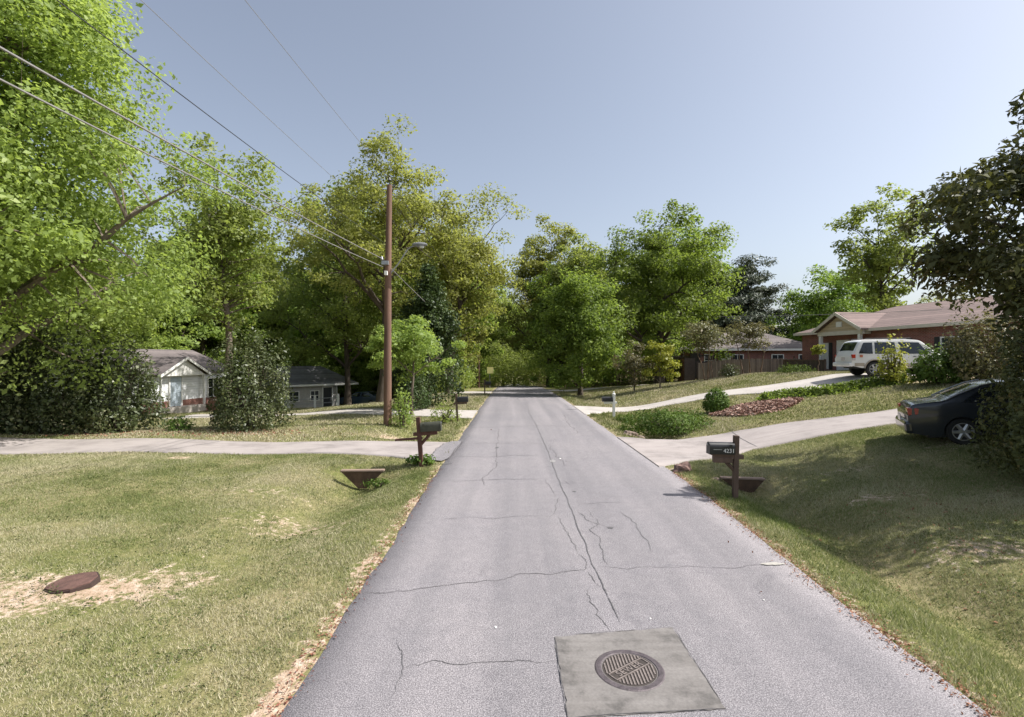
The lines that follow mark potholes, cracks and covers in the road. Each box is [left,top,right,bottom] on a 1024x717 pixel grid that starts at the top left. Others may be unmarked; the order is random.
manhole cover [595,650,665,692]
crack [372,502,761,631]
utility cover [43,571,101,594]
crack [445,426,510,484]
